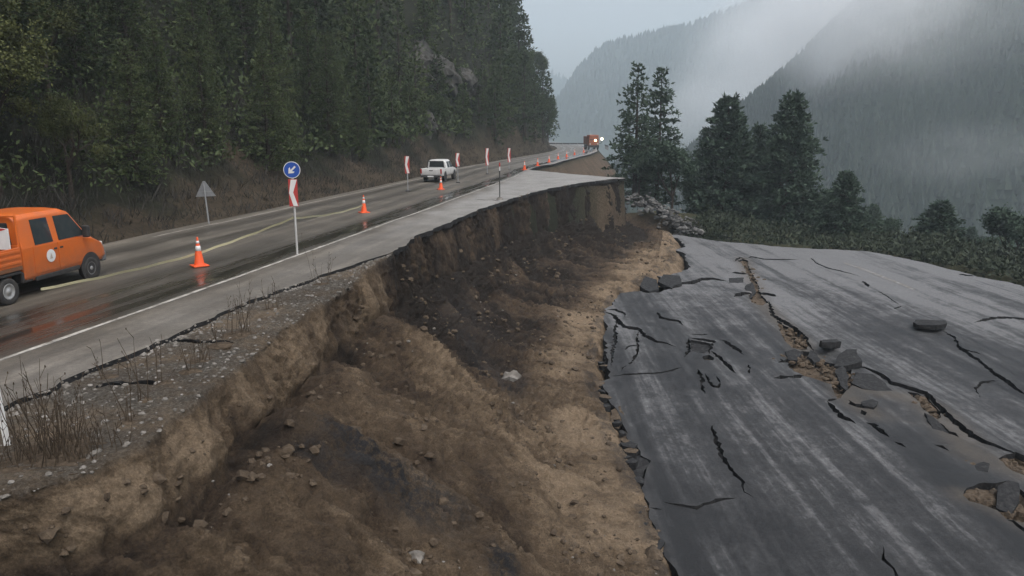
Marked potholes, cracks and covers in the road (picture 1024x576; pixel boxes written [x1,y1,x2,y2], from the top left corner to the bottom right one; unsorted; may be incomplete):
crack [650,426,753,510]
pothole [963,481,1024,522]
crack [828,331,1024,459]
crack [606,309,751,393]
crack [96,380,156,388]
crack [775,359,803,379]
crack [682,256,901,352]
pothole [788,351,852,399]
crack [882,547,898,576]
